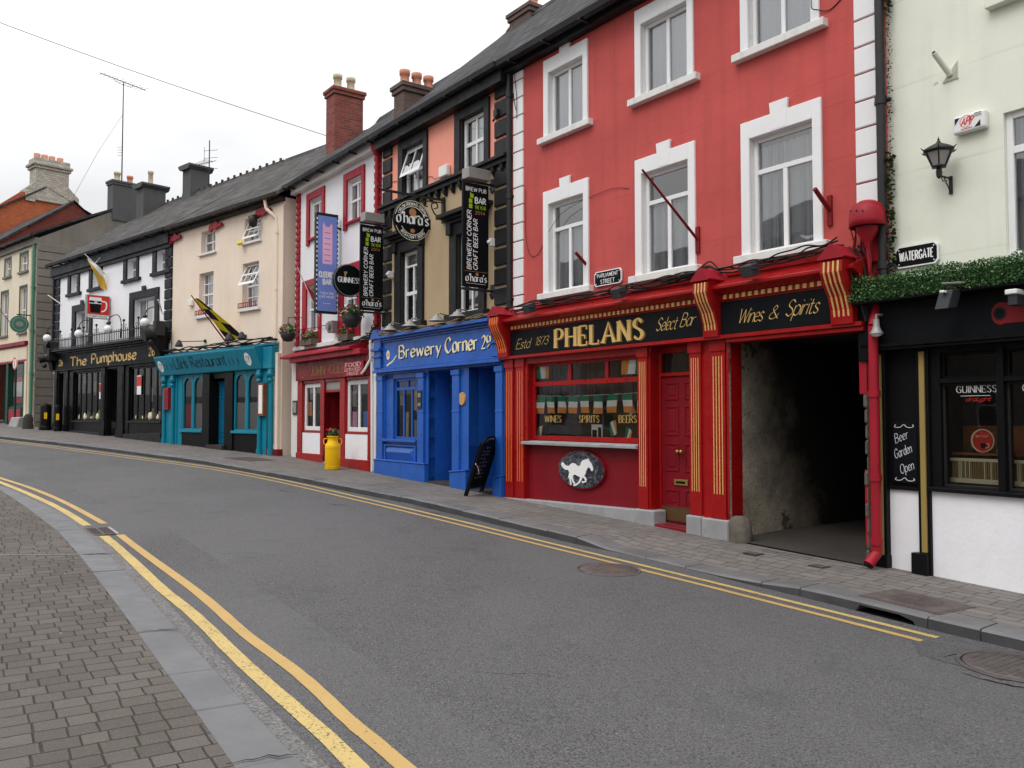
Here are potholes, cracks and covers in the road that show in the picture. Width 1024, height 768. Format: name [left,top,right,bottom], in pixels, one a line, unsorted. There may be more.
manhole cover [575,563,641,577]
manhole cover [955,650,1024,682]
drain grate [82,527,119,536]
